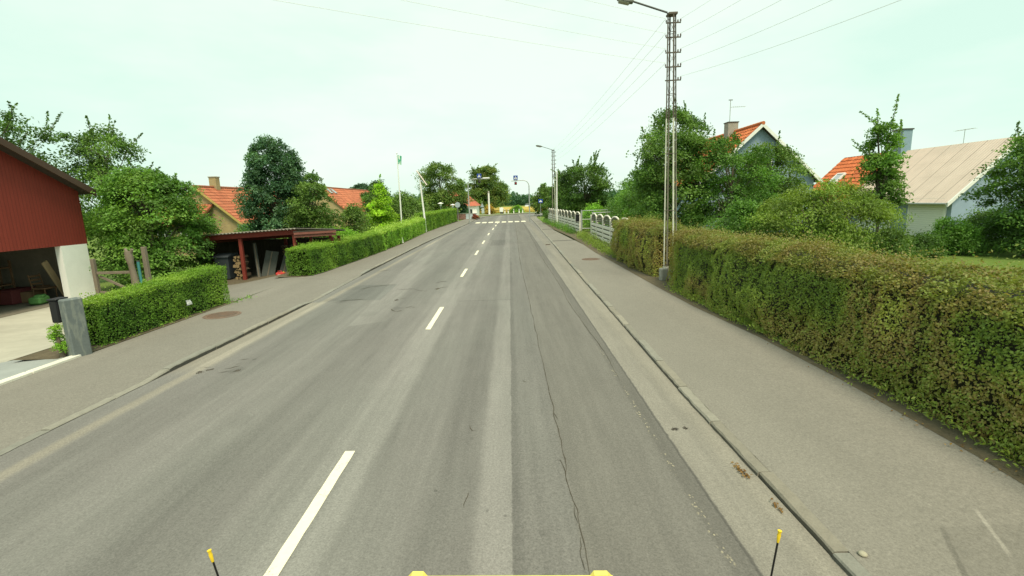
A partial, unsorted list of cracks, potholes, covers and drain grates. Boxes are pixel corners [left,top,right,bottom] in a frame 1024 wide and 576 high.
manhole cover [202,311,242,319]
crack [517,238,590,574]
